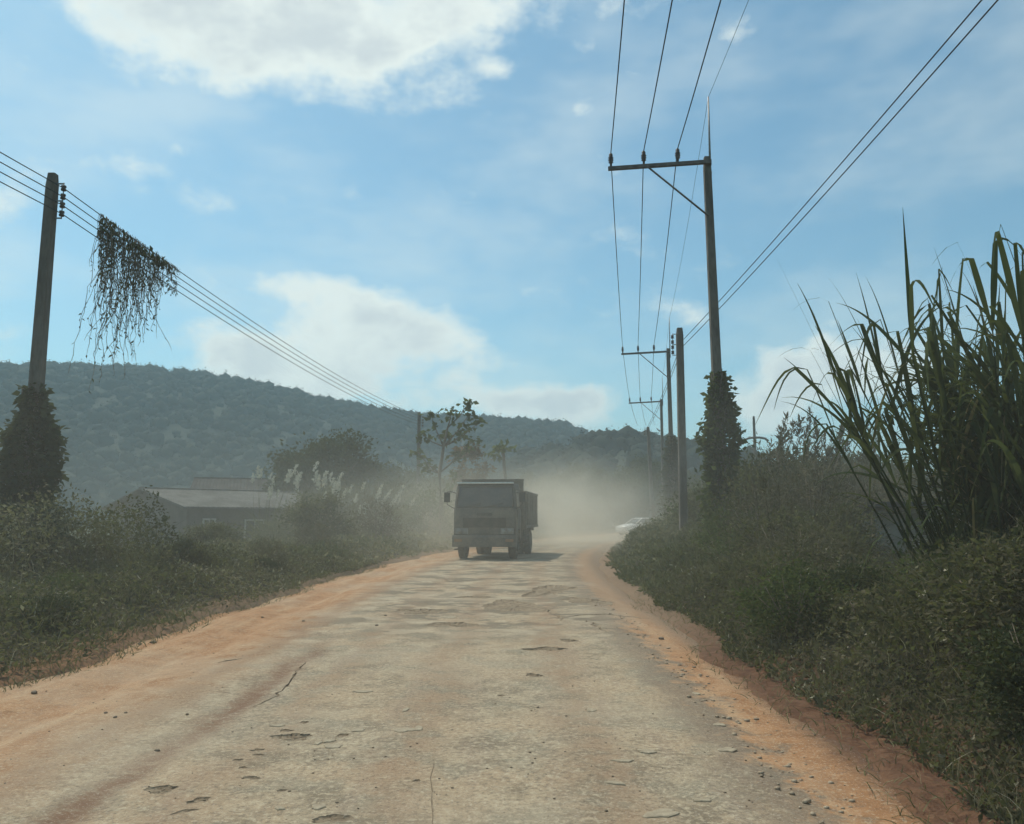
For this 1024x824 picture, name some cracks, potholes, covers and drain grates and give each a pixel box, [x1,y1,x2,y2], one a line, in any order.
pothole [481,599,549,612]
pothole [521,585,578,598]
pothole [269,733,313,741]
pothole [312,814,354,823]
crack [253,662,306,707]
pothole [144,785,179,794]
